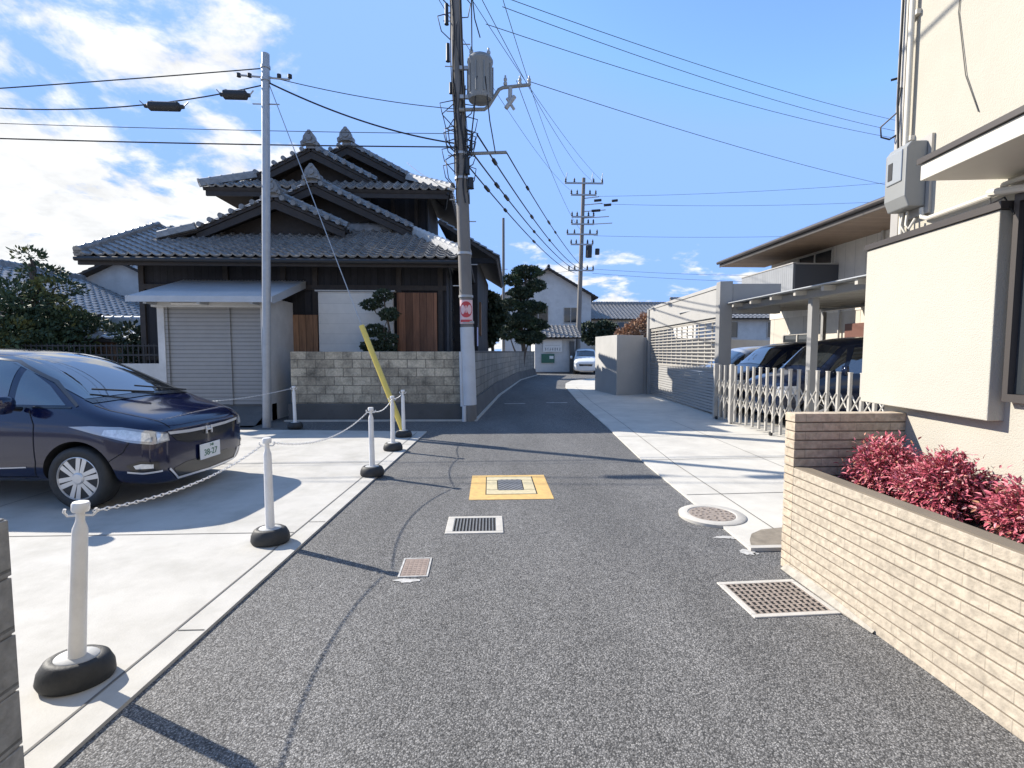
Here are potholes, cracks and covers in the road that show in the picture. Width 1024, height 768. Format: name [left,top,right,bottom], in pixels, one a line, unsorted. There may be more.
drain grate [717,579,841,619]
manhole cover [469,475,554,500]
drain grate [445,516,504,534]
manhole cover [678,504,747,528]
manhole cover [393,557,432,583]
